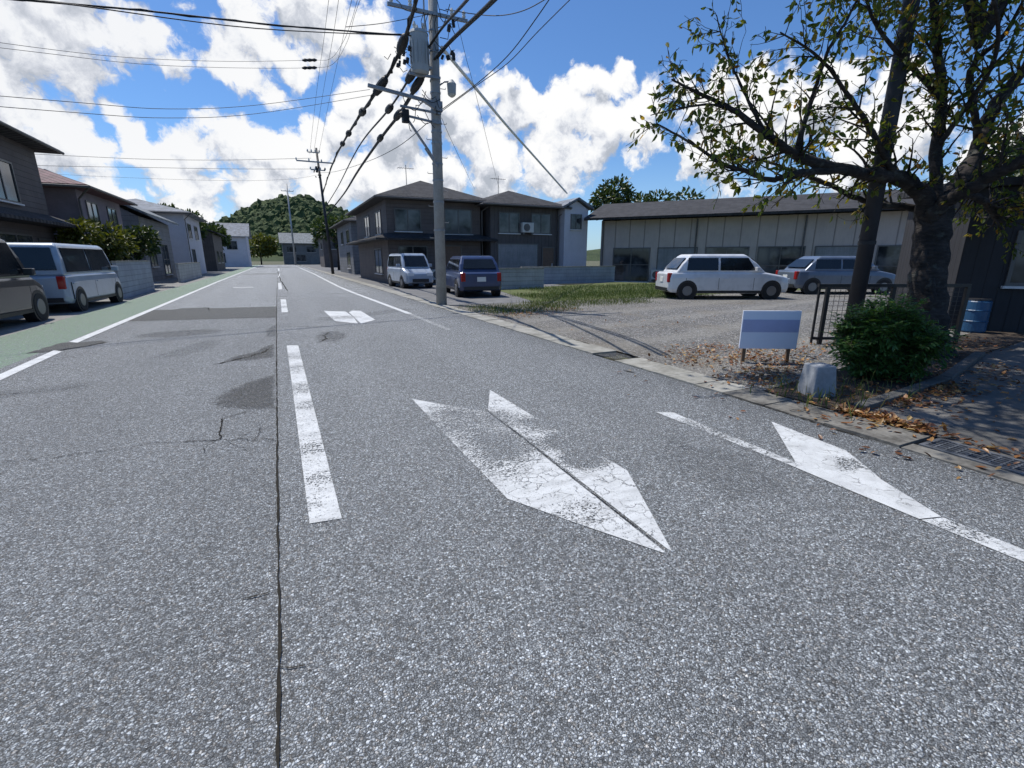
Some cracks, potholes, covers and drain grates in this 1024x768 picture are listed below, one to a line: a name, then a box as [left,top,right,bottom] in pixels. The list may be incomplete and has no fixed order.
crack [8,410,276,461]
drain grate [919,438,1024,476]
